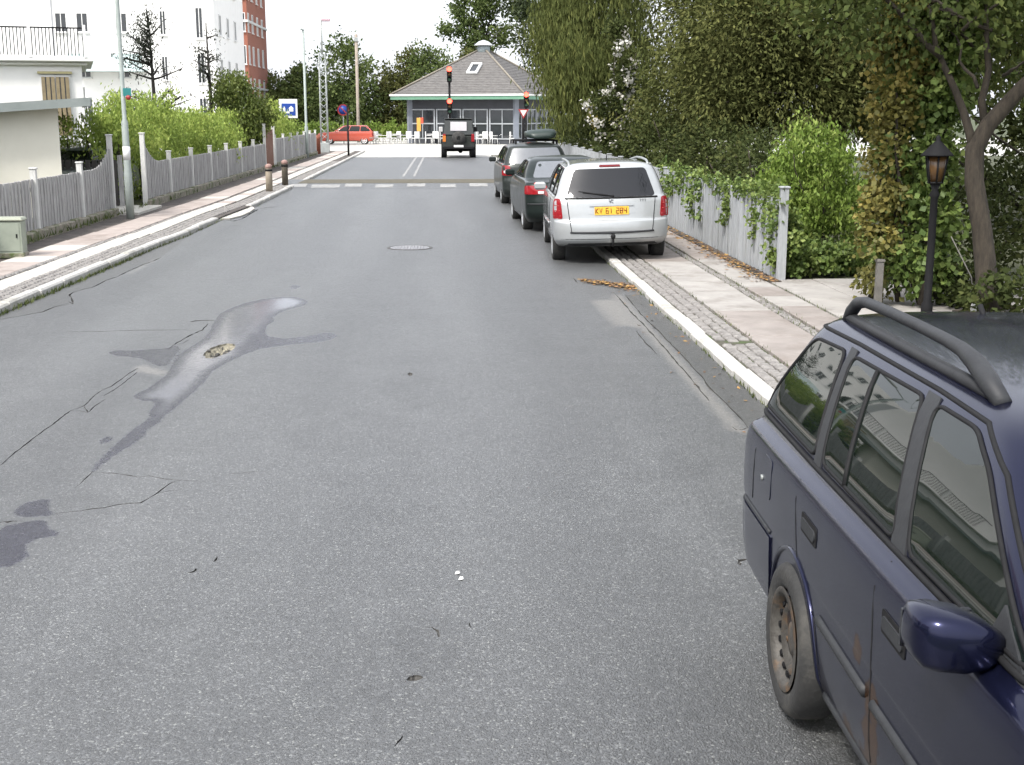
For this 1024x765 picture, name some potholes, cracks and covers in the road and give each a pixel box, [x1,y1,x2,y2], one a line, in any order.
crack [168,320,214,349]
pothole [203,343,235,358]
crack [0,257,161,320]
crack [0,368,138,466]
crack [56,471,255,514]
